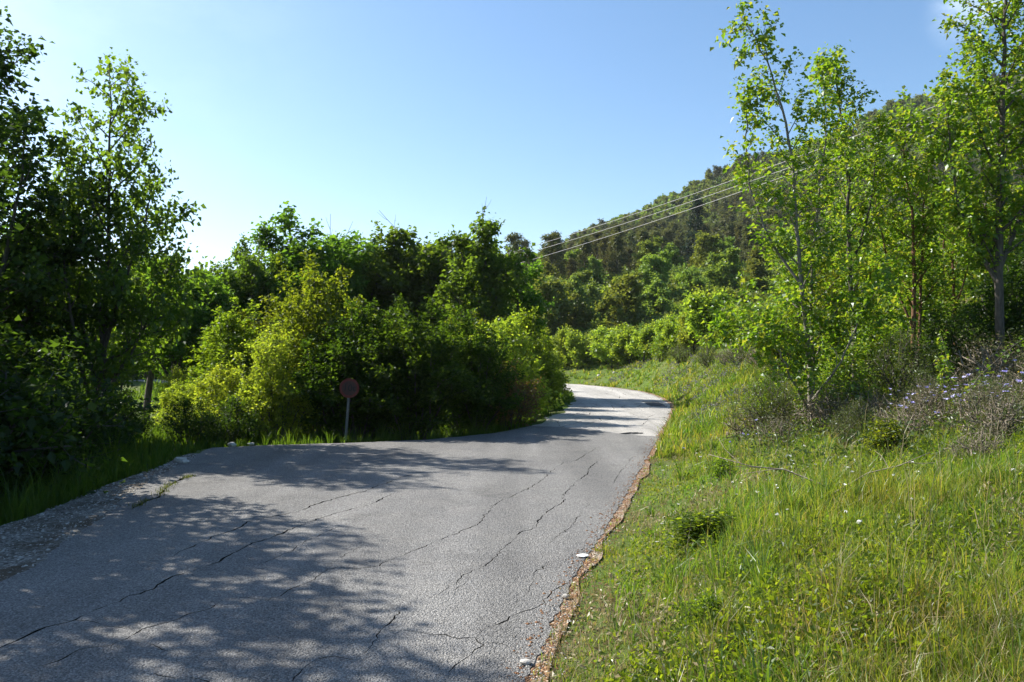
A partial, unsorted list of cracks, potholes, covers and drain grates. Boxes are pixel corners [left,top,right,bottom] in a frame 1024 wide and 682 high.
crack [0,450,593,682]
